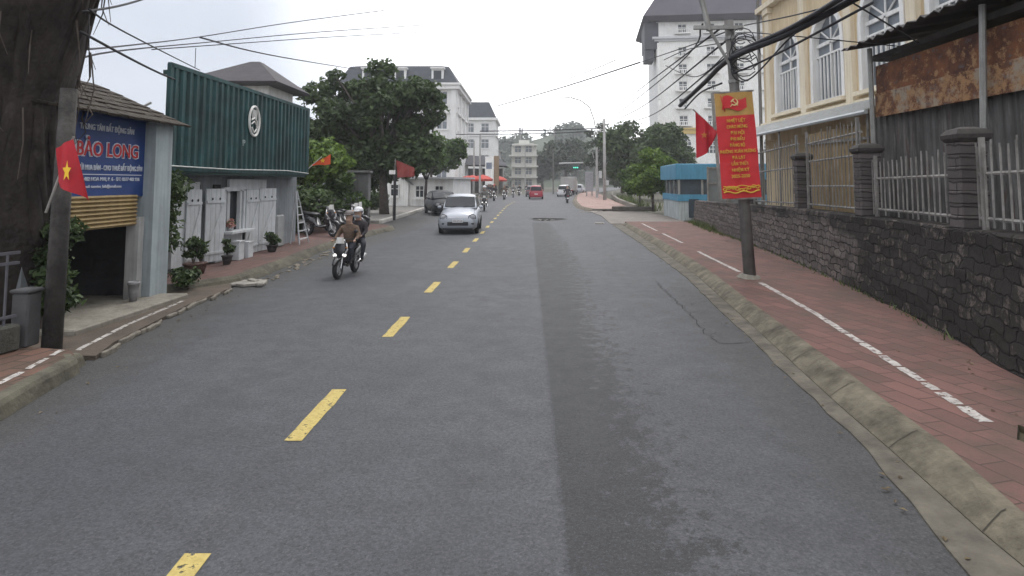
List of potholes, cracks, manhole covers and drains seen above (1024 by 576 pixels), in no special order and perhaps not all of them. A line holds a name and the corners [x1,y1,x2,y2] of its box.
crack [658,283,747,344]
